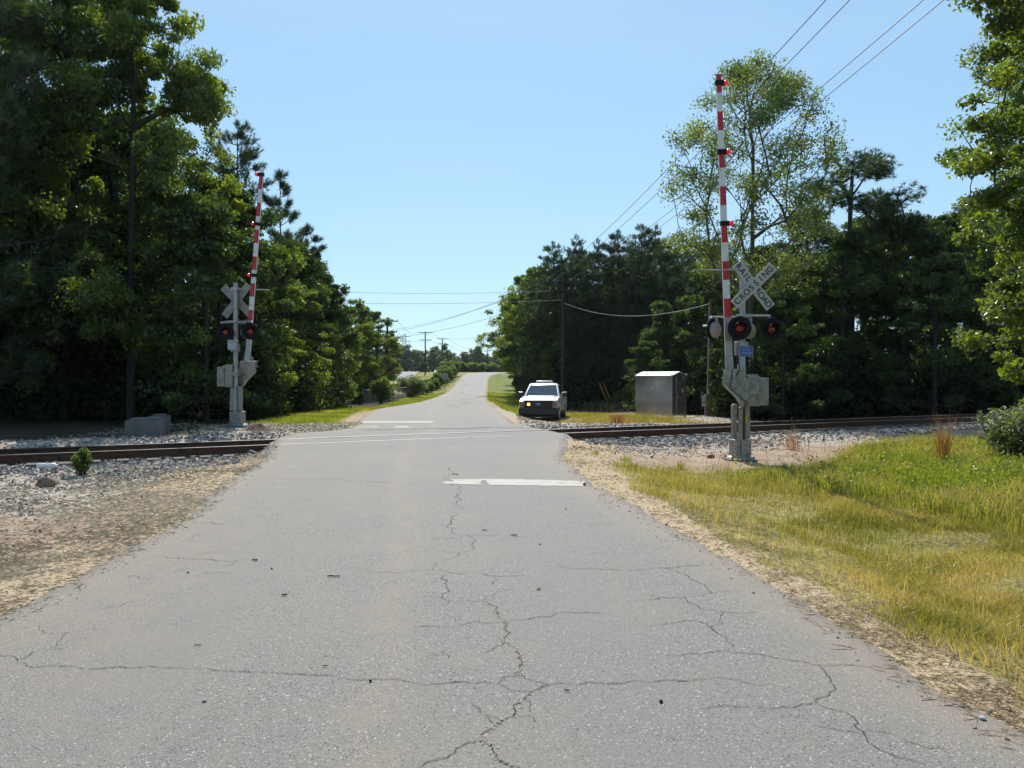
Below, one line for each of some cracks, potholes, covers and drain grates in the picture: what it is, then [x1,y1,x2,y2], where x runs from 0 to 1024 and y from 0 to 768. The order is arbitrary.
crack [568,565,932,767]
crack [2,467,774,768]
